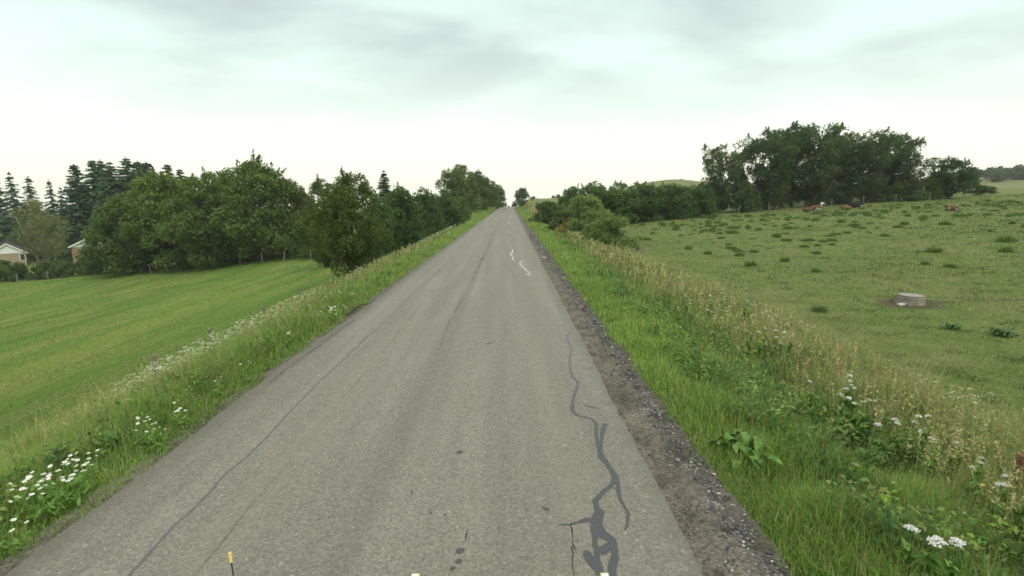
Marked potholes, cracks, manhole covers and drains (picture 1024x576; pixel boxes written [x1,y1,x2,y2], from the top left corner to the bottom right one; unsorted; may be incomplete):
crack [65,308,369,557]
crack [194,268,453,576]
